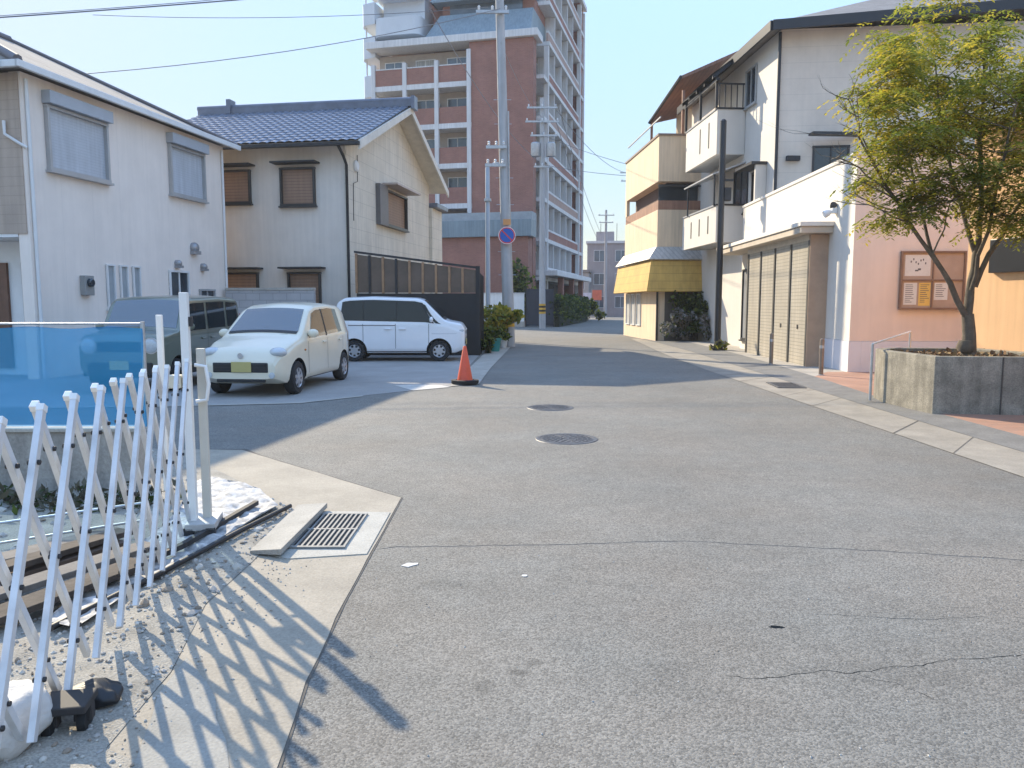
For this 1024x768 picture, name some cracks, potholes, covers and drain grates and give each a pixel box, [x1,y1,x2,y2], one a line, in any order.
manhole cover [535,433,598,445]
crack [735,655,1021,700]
drain grate [267,511,390,559]
